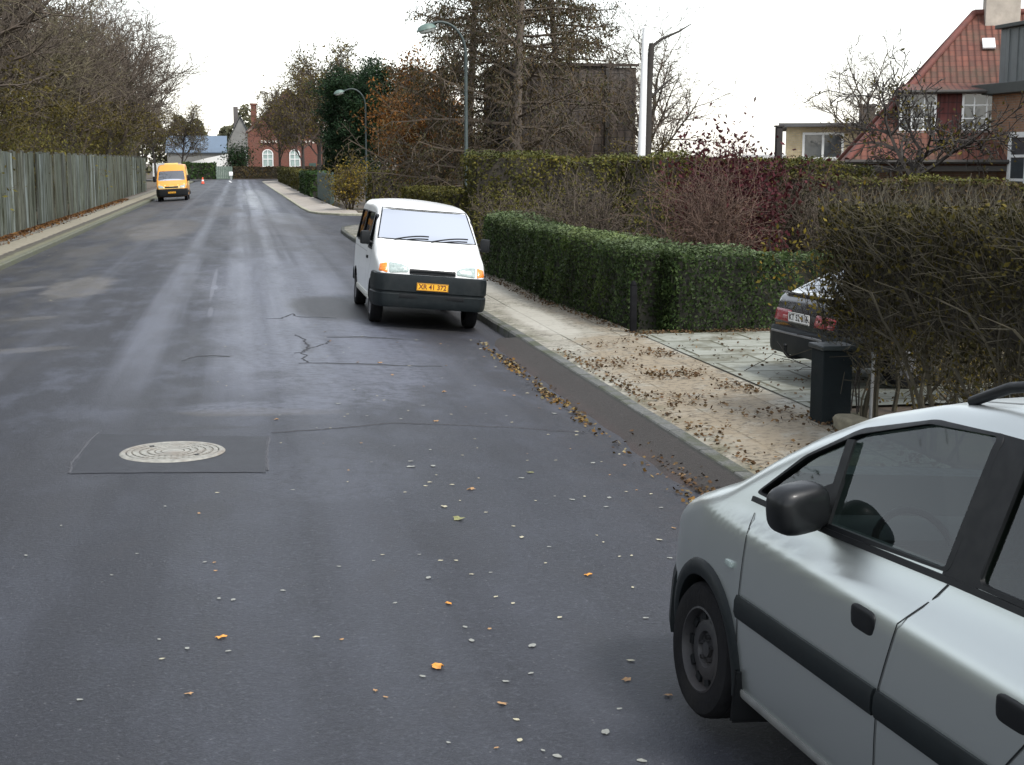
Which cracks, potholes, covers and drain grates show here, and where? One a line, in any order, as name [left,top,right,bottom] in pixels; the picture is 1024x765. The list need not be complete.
manhole cover [119,441,225,463]
crack [270,314,442,367]
